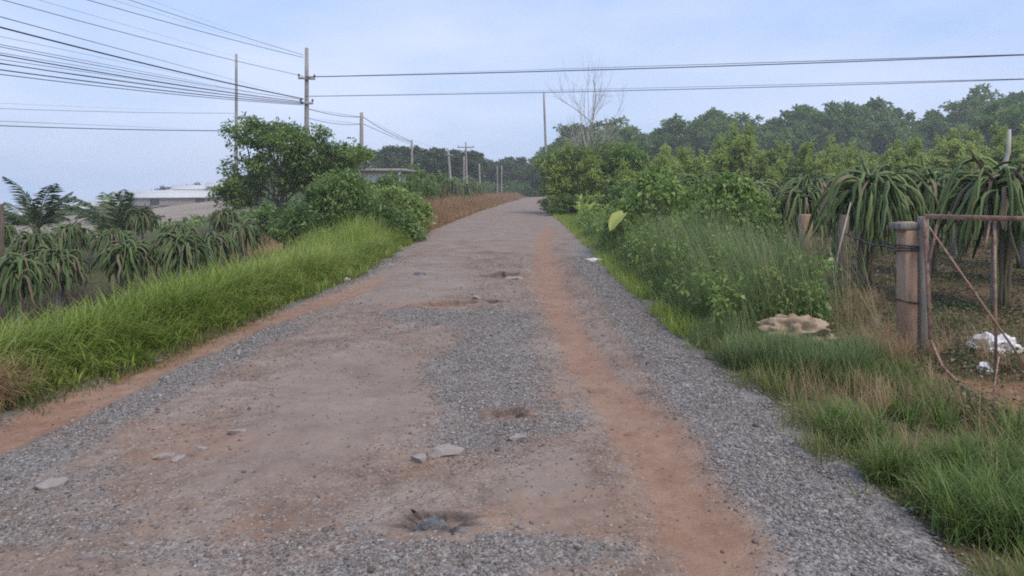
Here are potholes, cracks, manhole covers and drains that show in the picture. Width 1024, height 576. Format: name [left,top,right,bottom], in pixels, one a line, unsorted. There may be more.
pothole [414,299,489,309]
pothole [474,270,524,281]
pothole [476,404,542,423]
pothole [363,507,507,542]
